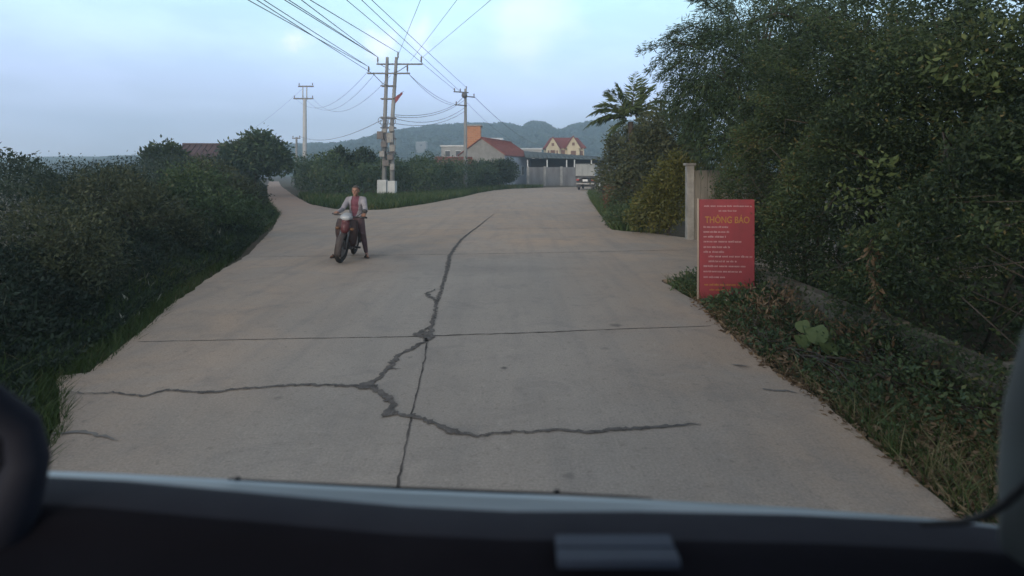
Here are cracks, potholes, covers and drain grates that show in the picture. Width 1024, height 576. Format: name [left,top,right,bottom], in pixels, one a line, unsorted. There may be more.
crack [65,216,697,437]
crack [53,430,114,440]
